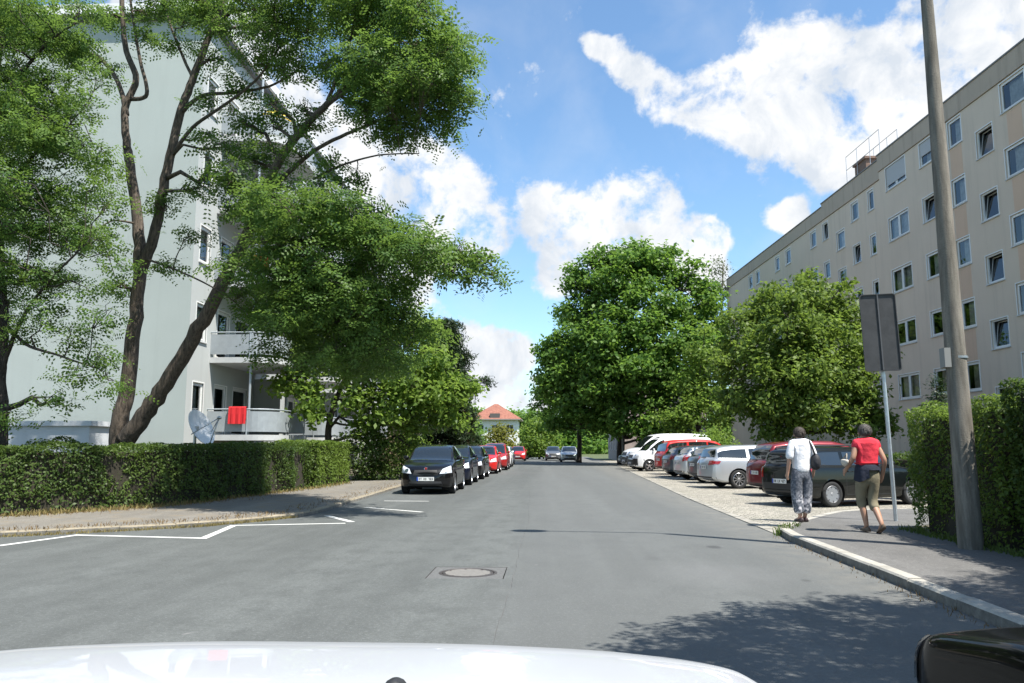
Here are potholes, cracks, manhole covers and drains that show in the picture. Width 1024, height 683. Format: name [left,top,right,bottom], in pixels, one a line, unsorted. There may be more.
manhole cover [426,567,507,579]
